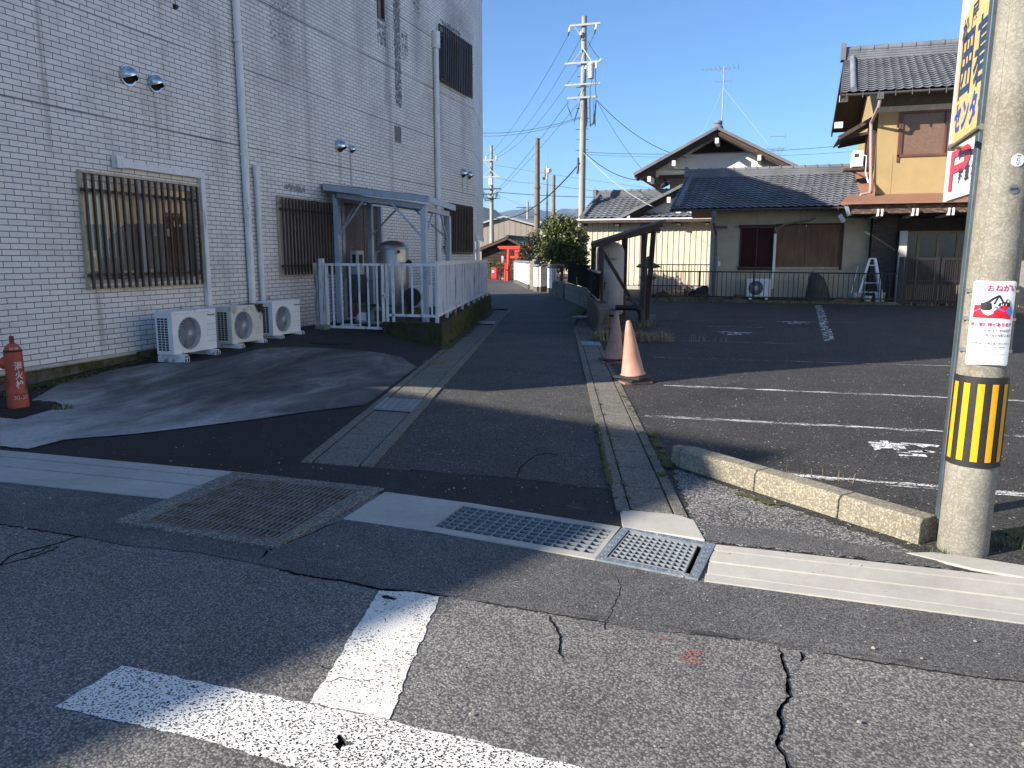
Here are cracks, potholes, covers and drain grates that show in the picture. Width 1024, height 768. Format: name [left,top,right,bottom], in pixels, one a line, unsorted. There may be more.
drain grate [425,502,620,560]
crack [0,537,78,566]
drain grate [595,527,716,581]
crack [775,649,804,768]
crack [549,616,563,657]
drain grate [113,471,384,549]
crack [470,453,602,489]
